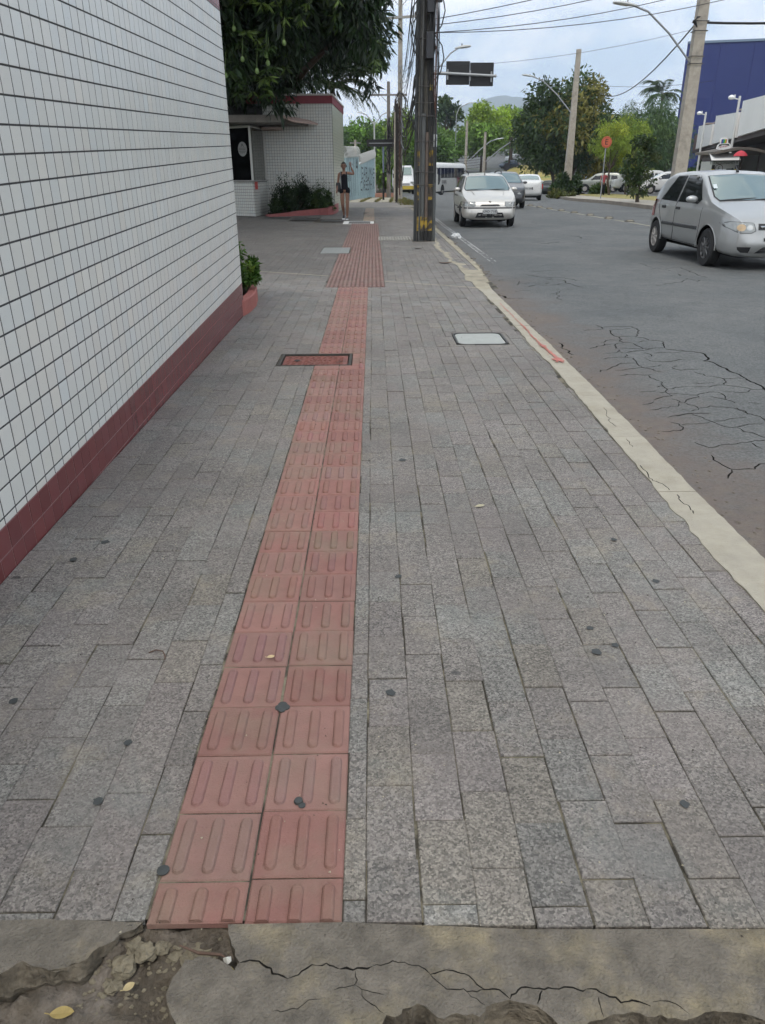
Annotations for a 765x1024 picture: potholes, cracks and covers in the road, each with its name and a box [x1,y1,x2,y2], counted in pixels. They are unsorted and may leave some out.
crack [589,326,765,478]
crack [605,409,694,514]
crack [240,960,688,1017]
manhole cover [277,353,352,366]
manhole cover [452,332,508,345]
pothole [0,925,237,1024]
